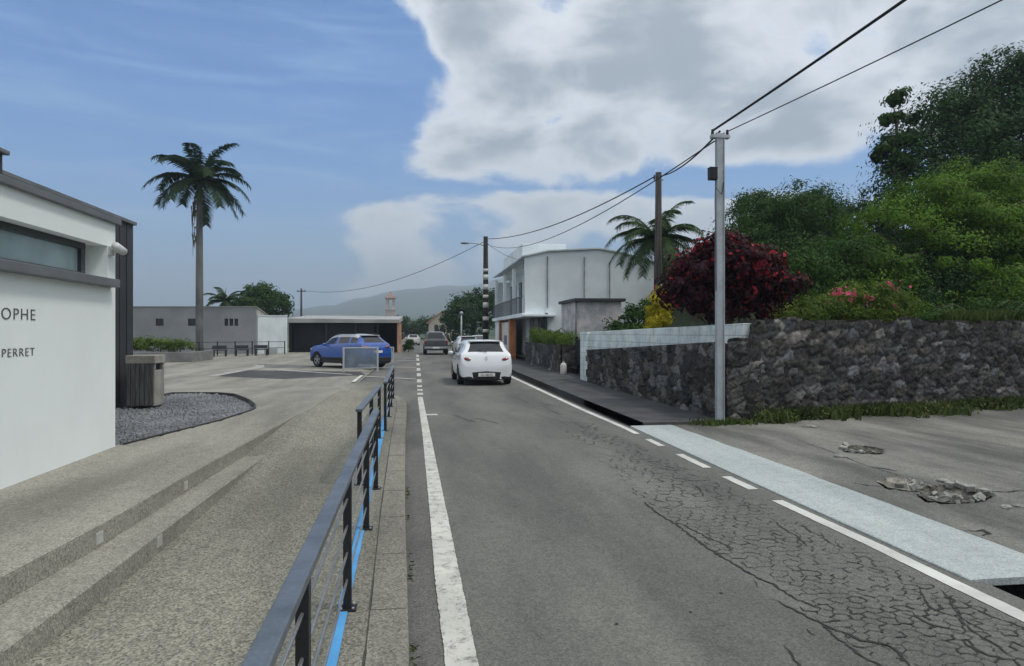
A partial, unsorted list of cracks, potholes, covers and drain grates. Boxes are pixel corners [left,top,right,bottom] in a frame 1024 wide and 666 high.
pothole [877,477,927,493]
pothole [915,480,996,504]
pothole [838,442,884,455]
crack [795,438,898,487]
crack [645,502,1024,666]
